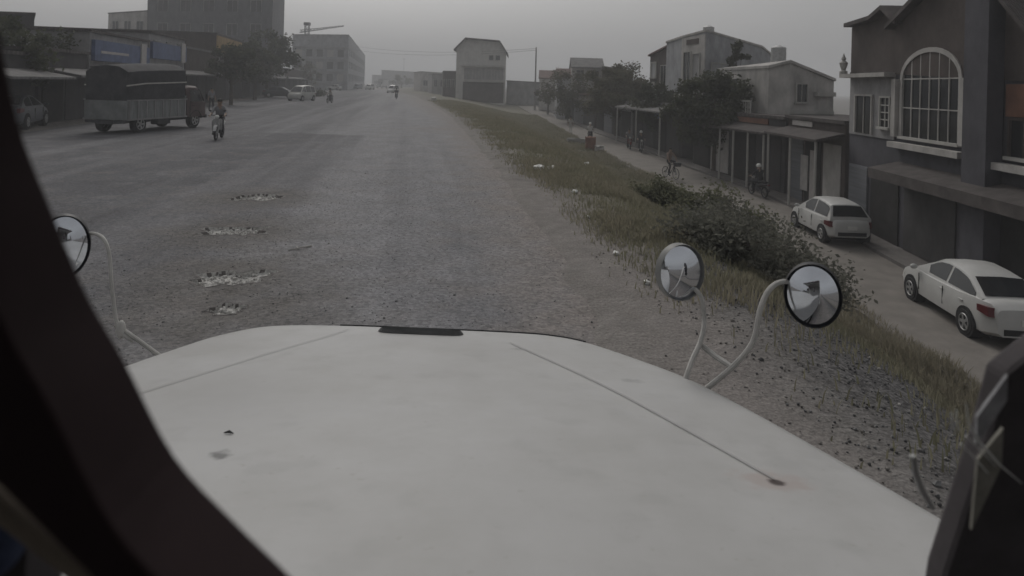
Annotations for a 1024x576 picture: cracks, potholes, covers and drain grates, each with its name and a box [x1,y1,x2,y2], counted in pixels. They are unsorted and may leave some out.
pothole [185,269,283,288]
pothole [193,226,274,236]
pothole [201,302,250,316]
pothole [226,193,286,201]
